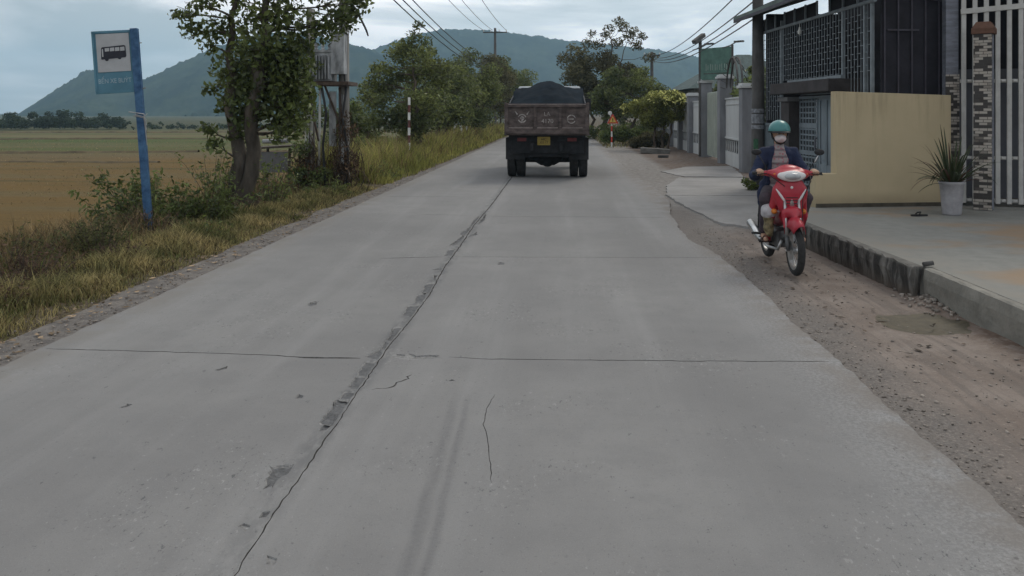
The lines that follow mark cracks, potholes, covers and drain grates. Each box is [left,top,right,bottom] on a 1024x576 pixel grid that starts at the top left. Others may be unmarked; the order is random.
pothole [263,464,294,489]
crack [47,176,829,576]
